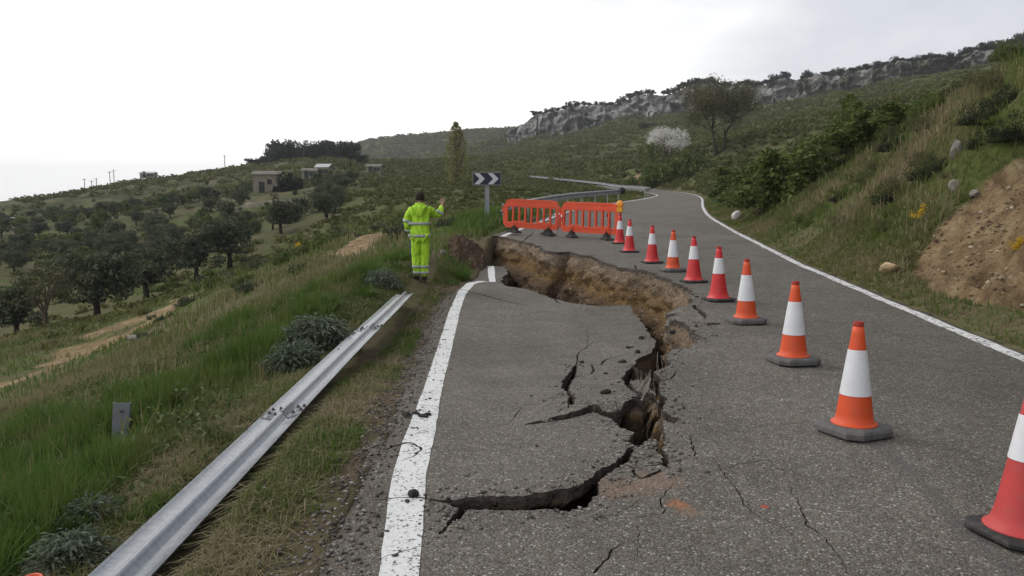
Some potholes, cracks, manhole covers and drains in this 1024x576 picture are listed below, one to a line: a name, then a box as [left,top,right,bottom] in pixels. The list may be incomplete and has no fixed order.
crack [372,326,698,573]
crack [716,460,850,575]
